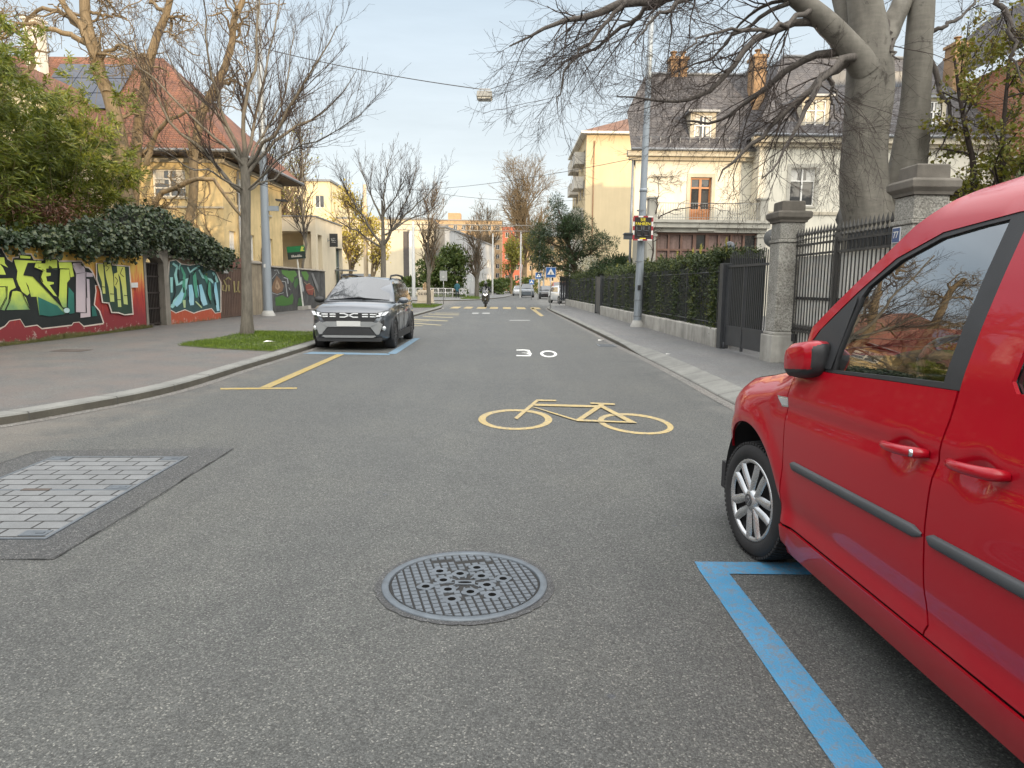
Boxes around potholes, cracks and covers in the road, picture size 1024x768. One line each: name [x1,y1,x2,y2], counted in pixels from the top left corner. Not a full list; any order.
manhole cover [373,550,555,625]
